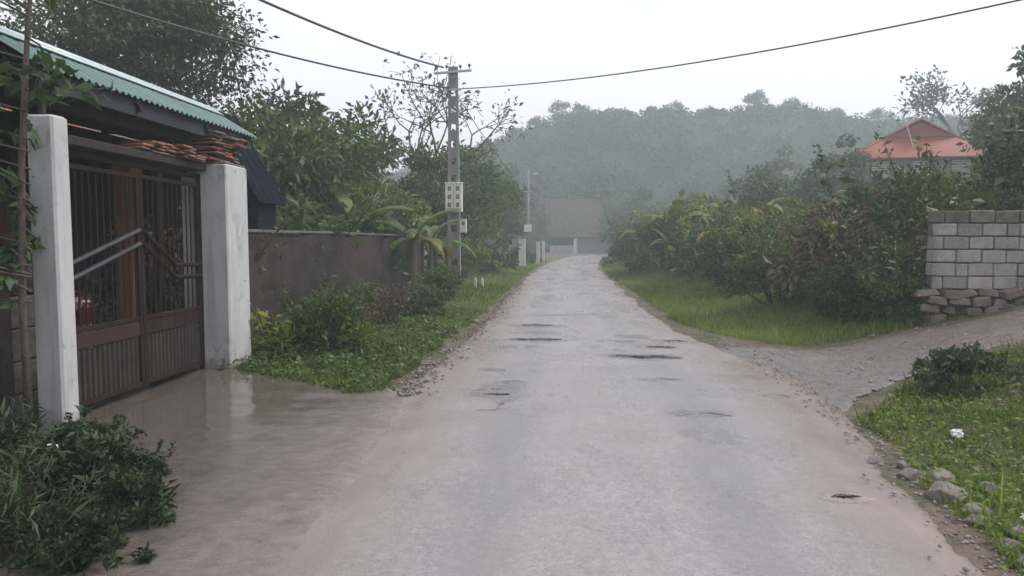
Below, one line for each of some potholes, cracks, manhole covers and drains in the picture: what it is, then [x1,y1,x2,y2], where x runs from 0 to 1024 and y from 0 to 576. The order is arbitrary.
pothole [817,490,879,504]
